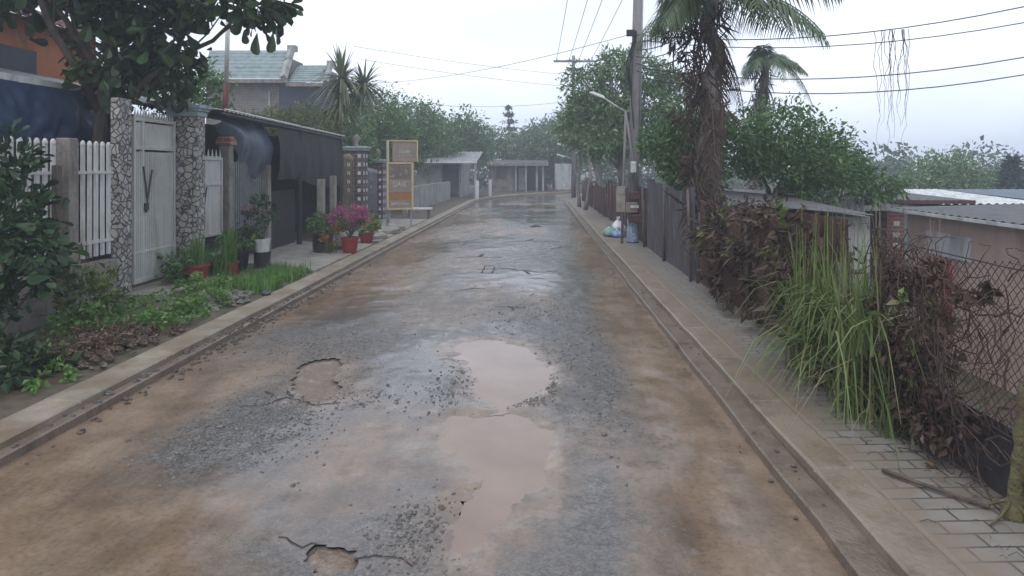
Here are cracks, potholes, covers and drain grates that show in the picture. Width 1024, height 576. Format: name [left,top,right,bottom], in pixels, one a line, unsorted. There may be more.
crack [454,239,572,290]
pothole [290,358,344,403]
pothole [453,340,555,416]
pothole [303,544,359,576]
pothole [437,414,555,556]
